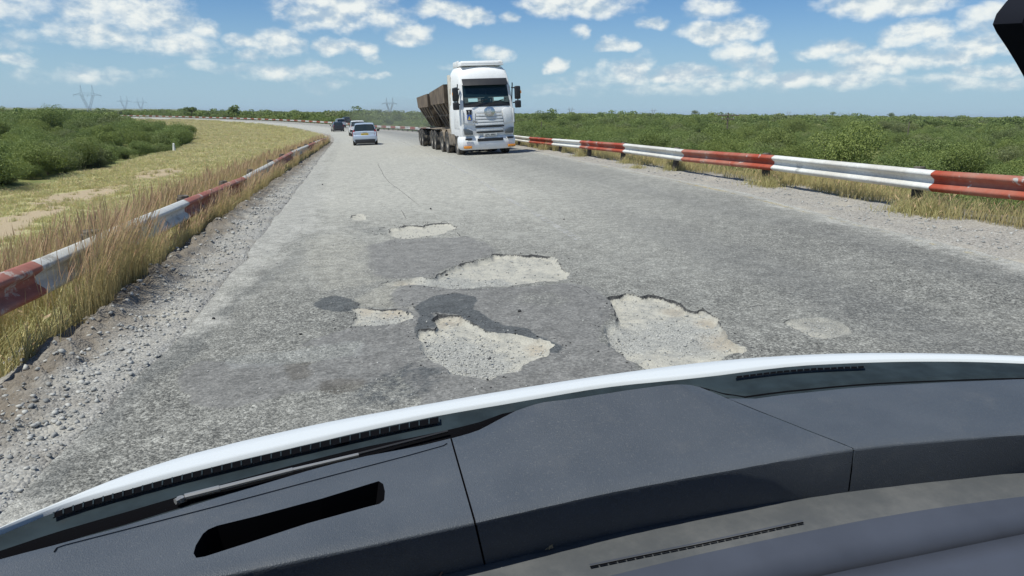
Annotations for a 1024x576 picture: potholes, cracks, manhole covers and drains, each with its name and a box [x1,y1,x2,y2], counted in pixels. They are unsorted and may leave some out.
pothole [604,293,747,369]
pothole [351,308,414,326]
pothole [416,313,555,380]
pothole [382,254,570,289]
pothole [388,223,457,239]
